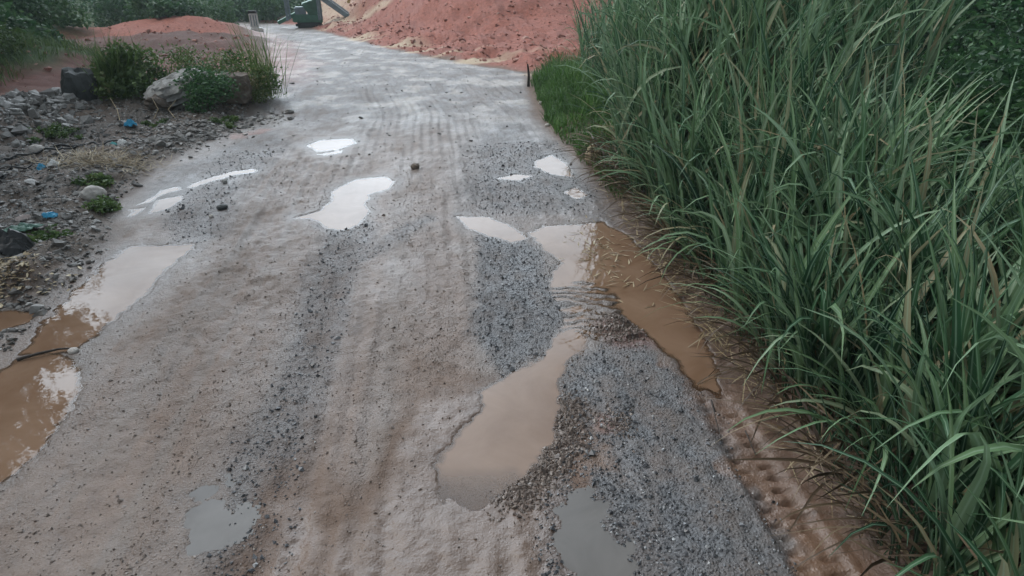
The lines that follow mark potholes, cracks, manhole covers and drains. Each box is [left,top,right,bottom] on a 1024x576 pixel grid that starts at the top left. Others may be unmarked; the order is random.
pothole [525,219,725,399]
pothole [452,214,531,244]
pothole [425,316,597,517]
pothole [290,174,399,232]
